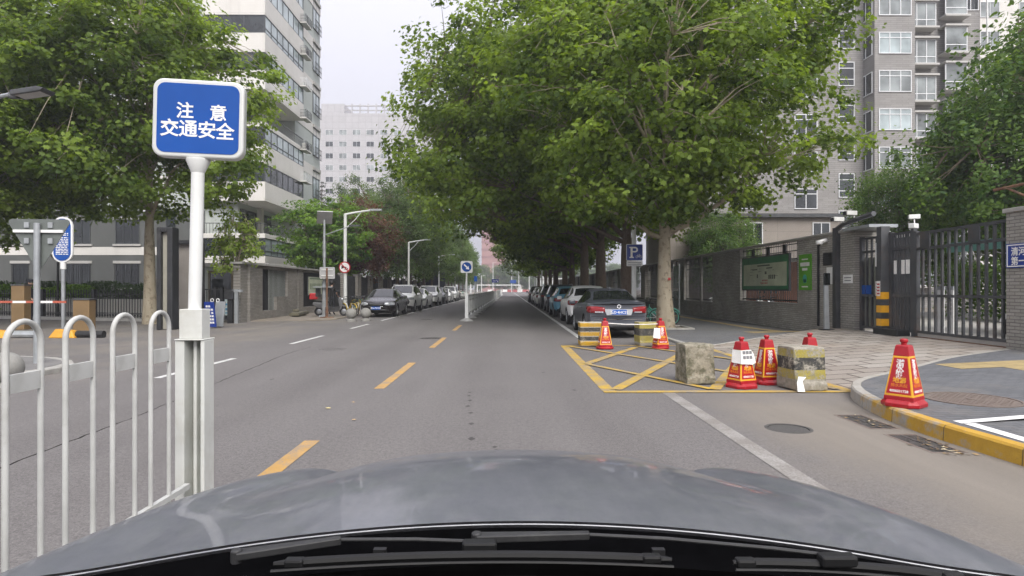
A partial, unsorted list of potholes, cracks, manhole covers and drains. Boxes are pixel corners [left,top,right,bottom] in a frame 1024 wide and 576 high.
manhole cover [924,392,1024,408]
manhole cover [764,423,814,434]
drain grate [884,433,980,455]
drain grate [835,414,901,429]
